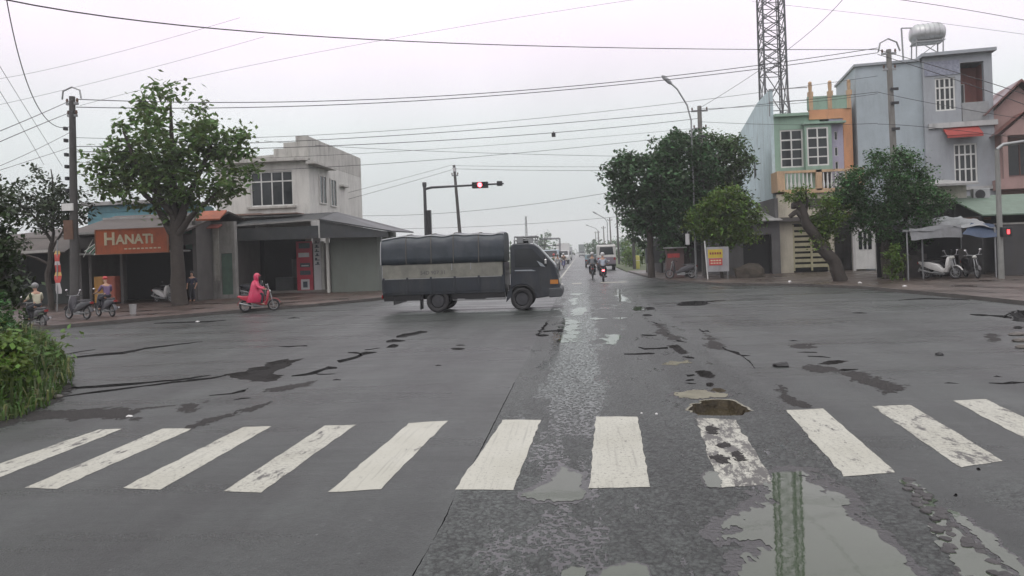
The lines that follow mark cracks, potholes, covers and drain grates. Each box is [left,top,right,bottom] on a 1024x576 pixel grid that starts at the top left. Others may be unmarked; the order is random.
pothole [685,399,753,416]
pothole [1008,310,1024,322]
crack [624,321,755,384]
crack [291,331,427,380]
crack [64,374,248,400]
crack [67,341,203,358]
